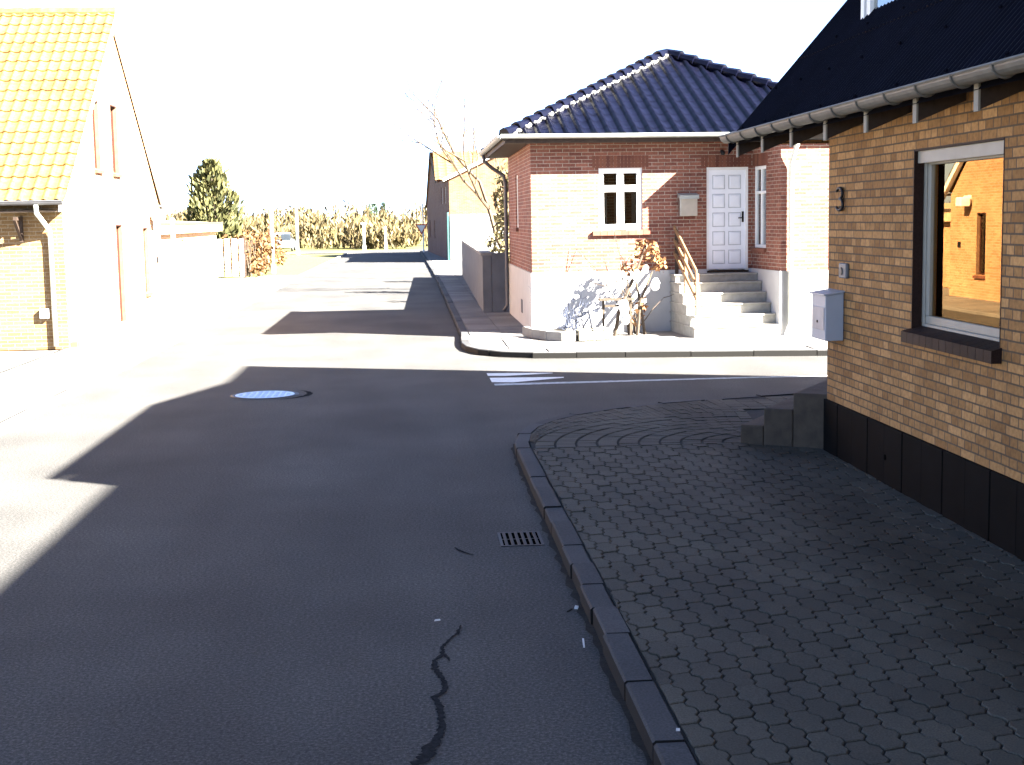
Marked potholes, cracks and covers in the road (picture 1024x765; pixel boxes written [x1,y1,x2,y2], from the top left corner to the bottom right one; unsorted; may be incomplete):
drain grate [497,531,544,547]
crack [410,625,461,765]
manhole cover [231,390,313,399]
